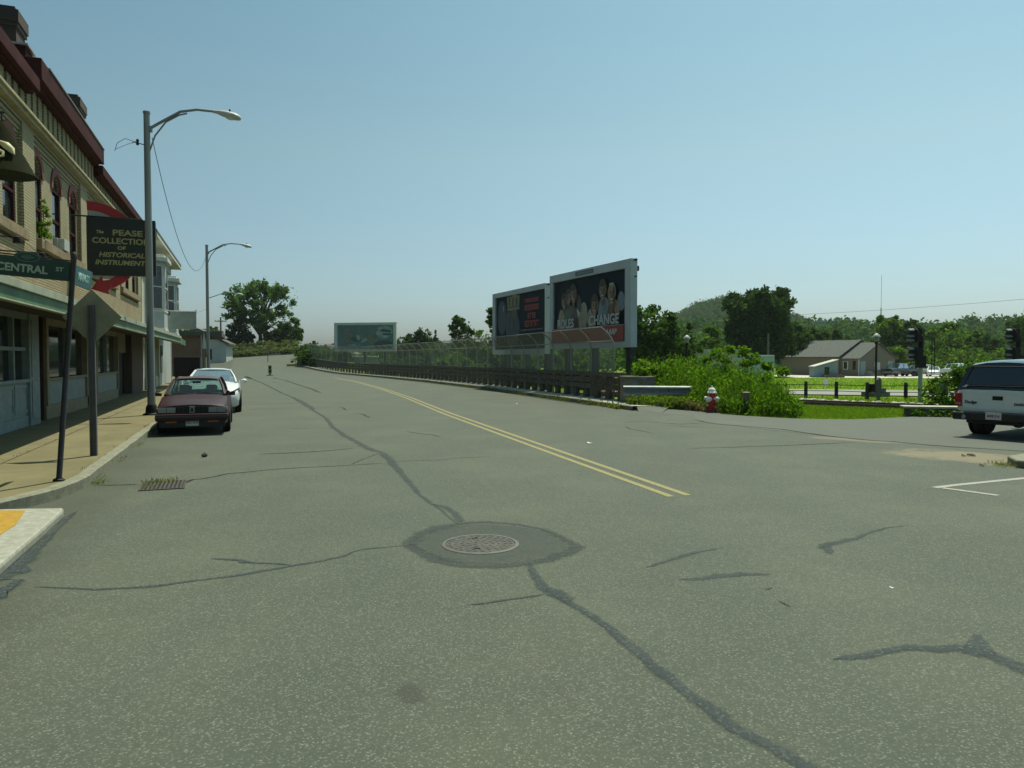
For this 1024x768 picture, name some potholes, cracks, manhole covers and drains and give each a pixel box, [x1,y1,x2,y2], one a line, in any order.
crack [251,378,370,418]
drain grate [138,474,187,491]
manhole cover [442,534,519,554]
